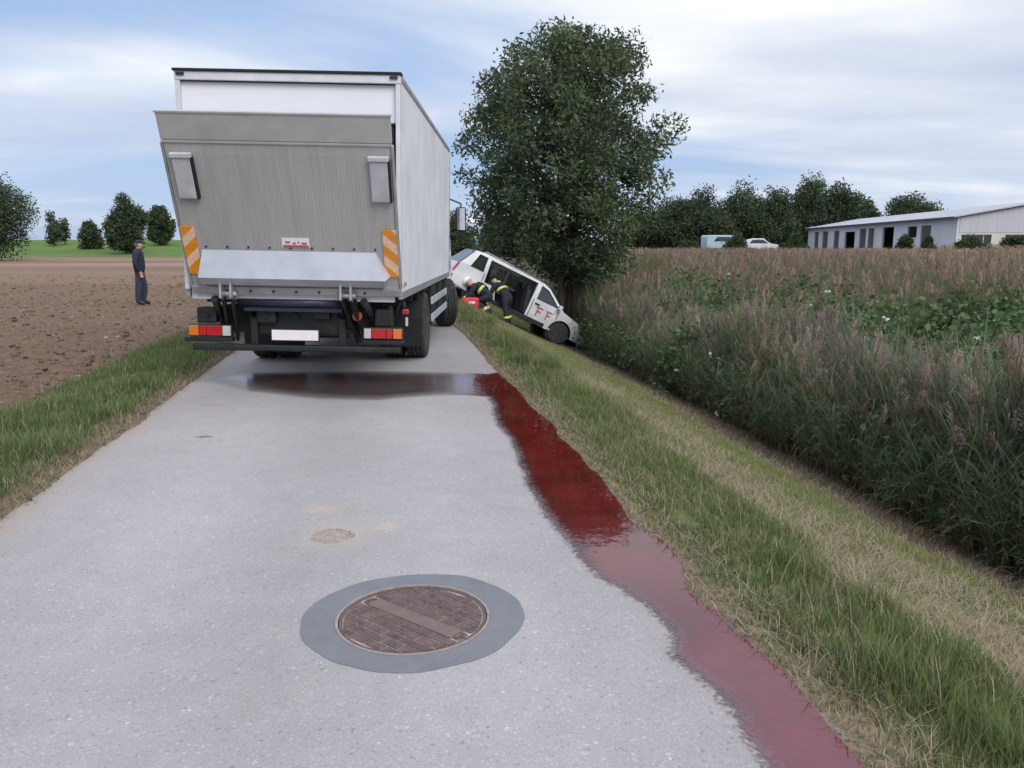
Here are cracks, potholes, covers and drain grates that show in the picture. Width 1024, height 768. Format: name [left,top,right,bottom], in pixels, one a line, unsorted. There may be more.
manhole cover [300,574,525,673]
